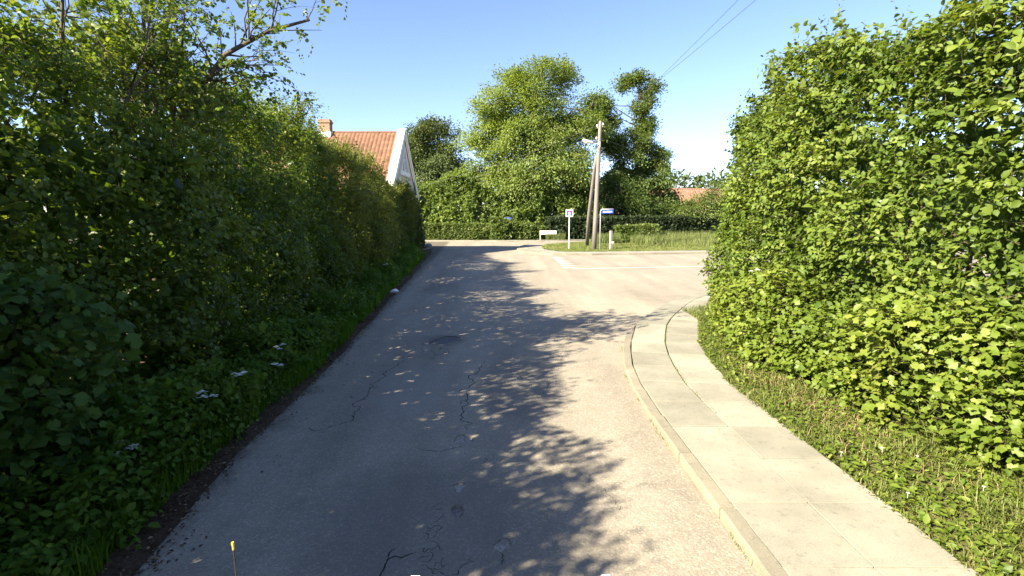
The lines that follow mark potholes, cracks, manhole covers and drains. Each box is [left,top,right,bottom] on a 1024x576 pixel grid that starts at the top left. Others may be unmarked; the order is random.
pothole [451,505,464,518]
crack [459,362,485,432]
pothole [493,538,512,552]
crack [305,343,450,433]
pothole [429,336,461,344]
crack [379,501,474,576]
